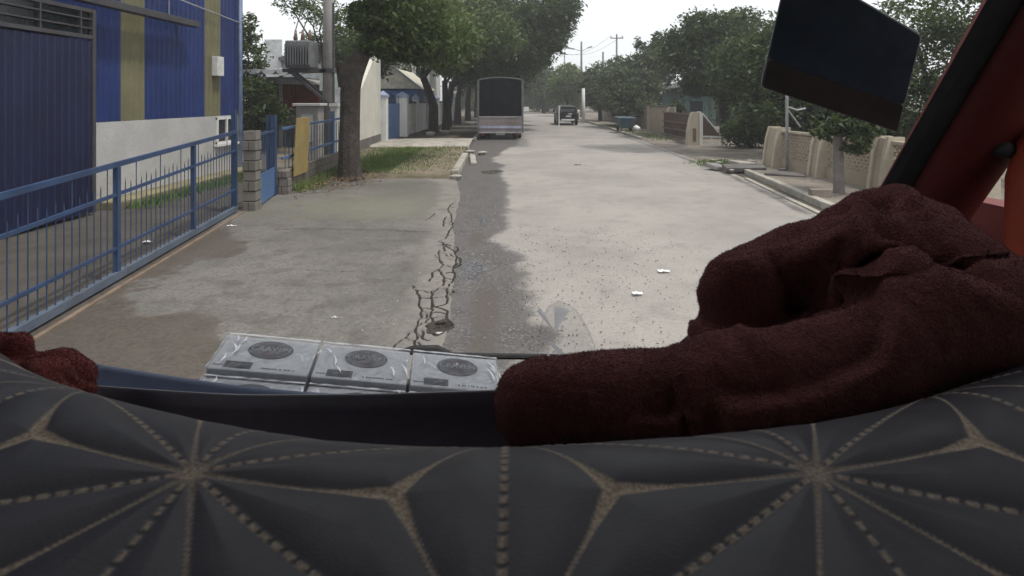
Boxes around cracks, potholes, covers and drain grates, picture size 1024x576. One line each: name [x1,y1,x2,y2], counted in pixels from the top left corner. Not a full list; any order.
crack [277,203,462,350]
